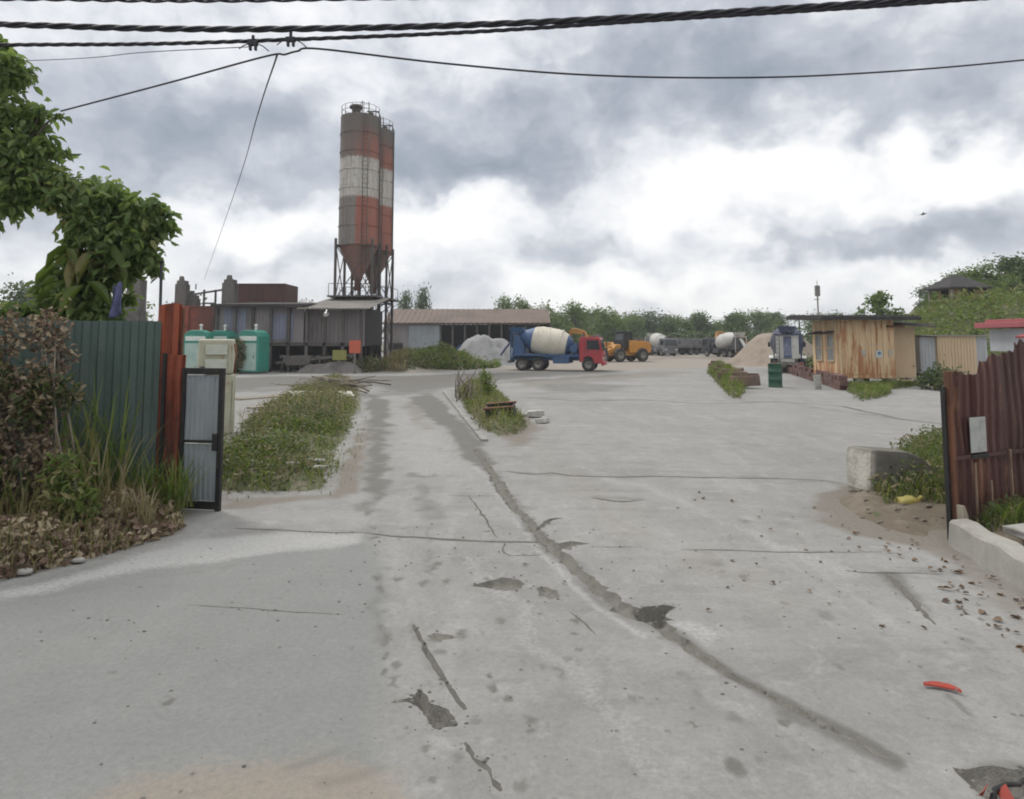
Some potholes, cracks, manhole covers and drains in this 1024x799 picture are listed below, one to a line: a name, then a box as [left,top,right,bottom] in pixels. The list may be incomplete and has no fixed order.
pothole [638,605,676,630]
pothole [952,765,1024,799]
pothole [471,577,524,591]
crack [463,742,503,791]
pothole [391,689,457,729]
crack [196,605,345,615]
crack [412,449,937,759]
